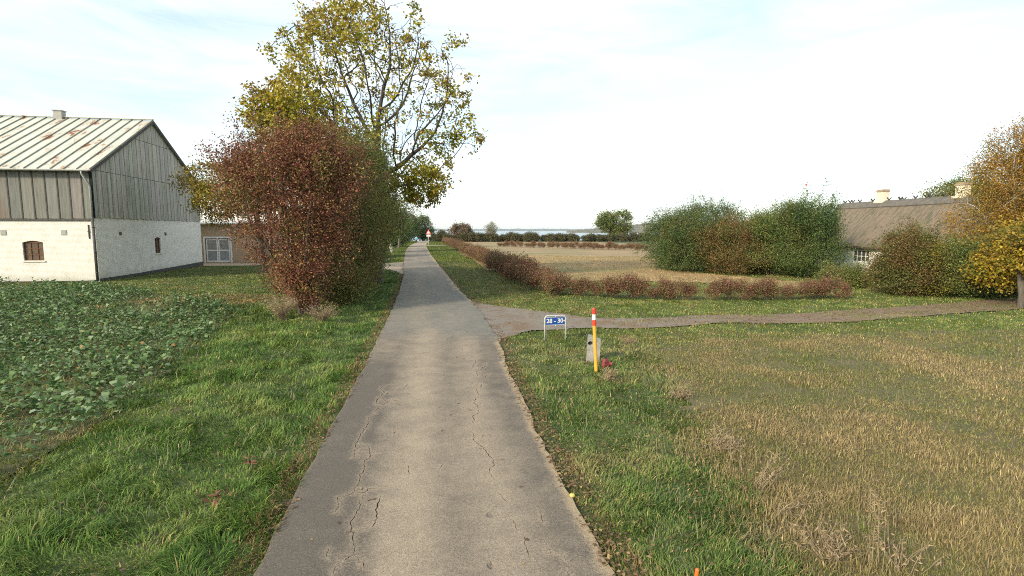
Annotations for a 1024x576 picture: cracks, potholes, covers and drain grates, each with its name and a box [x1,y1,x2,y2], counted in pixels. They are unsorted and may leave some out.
crack [326,383,410,573]
crack [463,362,495,476]
